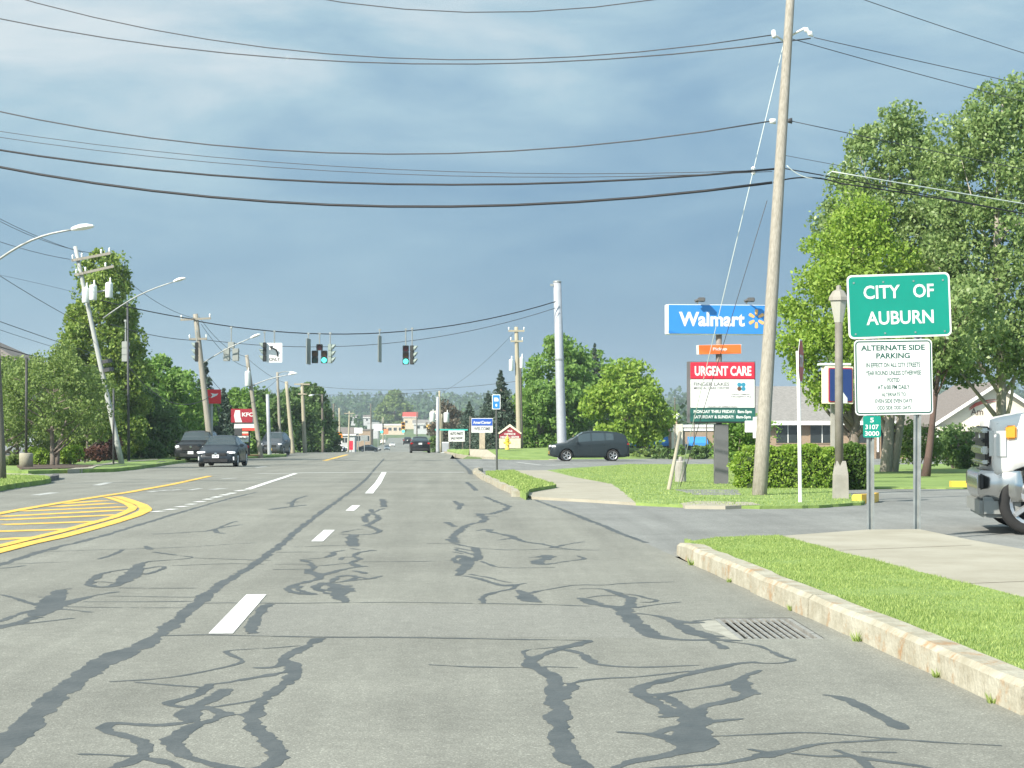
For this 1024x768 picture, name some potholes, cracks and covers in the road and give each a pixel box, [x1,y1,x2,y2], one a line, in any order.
drain grate [700,618,824,640]
